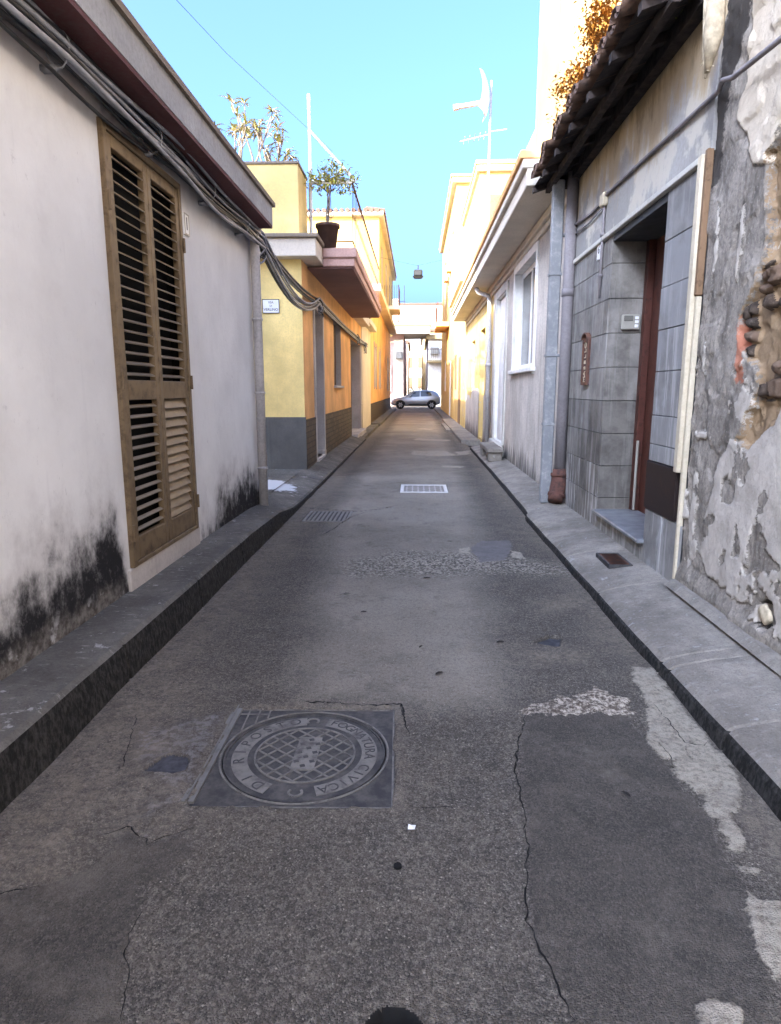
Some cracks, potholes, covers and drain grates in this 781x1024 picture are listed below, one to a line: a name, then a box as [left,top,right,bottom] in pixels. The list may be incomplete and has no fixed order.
crack [645,701,713,767]
crack [112,907,151,1024]
manhole cover [180,705,395,810]
crack [301,699,414,733]
crack [509,713,584,1024]
crack [95,824,194,848]
drain grate [302,511,353,522]
crack [118,711,189,769]
